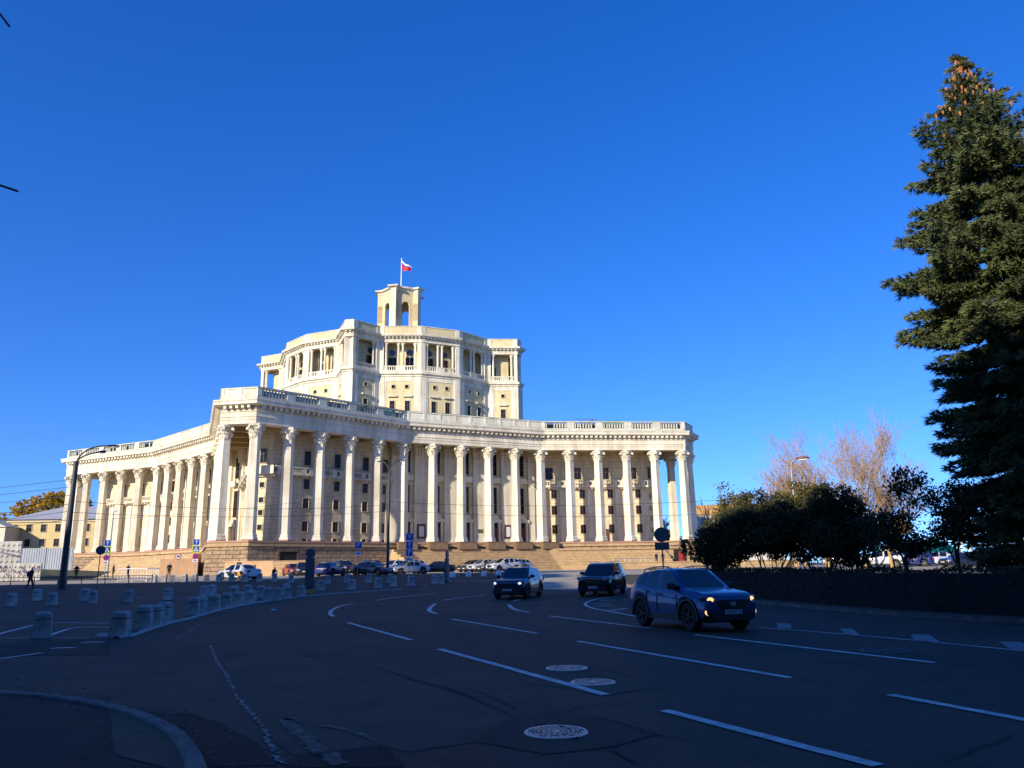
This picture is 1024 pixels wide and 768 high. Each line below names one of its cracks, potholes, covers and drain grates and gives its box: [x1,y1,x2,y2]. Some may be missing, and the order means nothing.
manhole cover [524,725,588,739]
manhole cover [570,678,616,686]
crack [939,730,1022,764]
crack [373,665,706,763]
